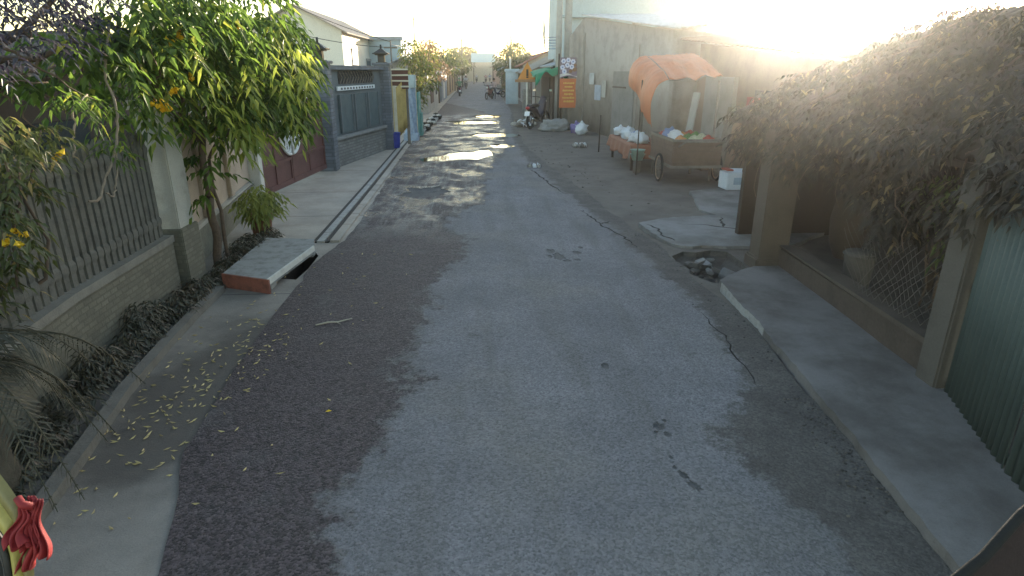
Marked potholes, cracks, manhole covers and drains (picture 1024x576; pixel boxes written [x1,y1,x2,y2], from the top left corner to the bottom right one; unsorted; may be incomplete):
pothole [653,419,672,437]
crack [699,311,759,388]
pothole [669,456,704,492]
pothole [419,149,493,162]
pothole [546,249,571,262]
crack [584,212,675,247]
pothole [672,250,745,283]
